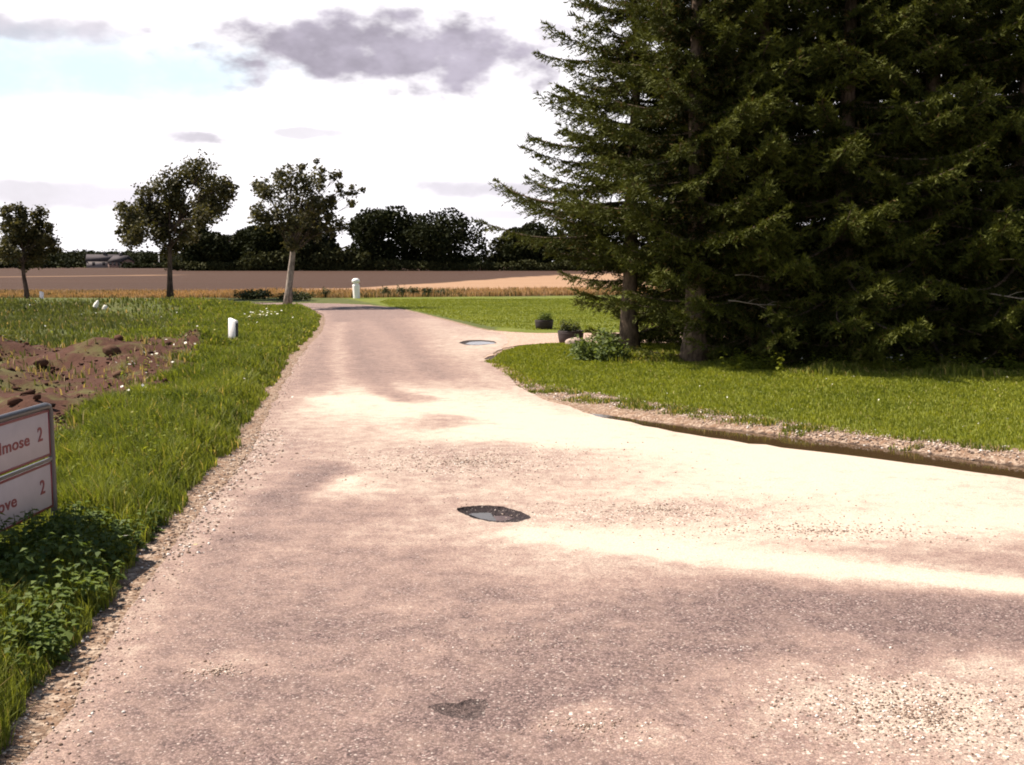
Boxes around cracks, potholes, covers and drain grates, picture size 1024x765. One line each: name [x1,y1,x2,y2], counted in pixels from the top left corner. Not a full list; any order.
pothole [457,505,531,522]
pothole [427,699,489,721]
